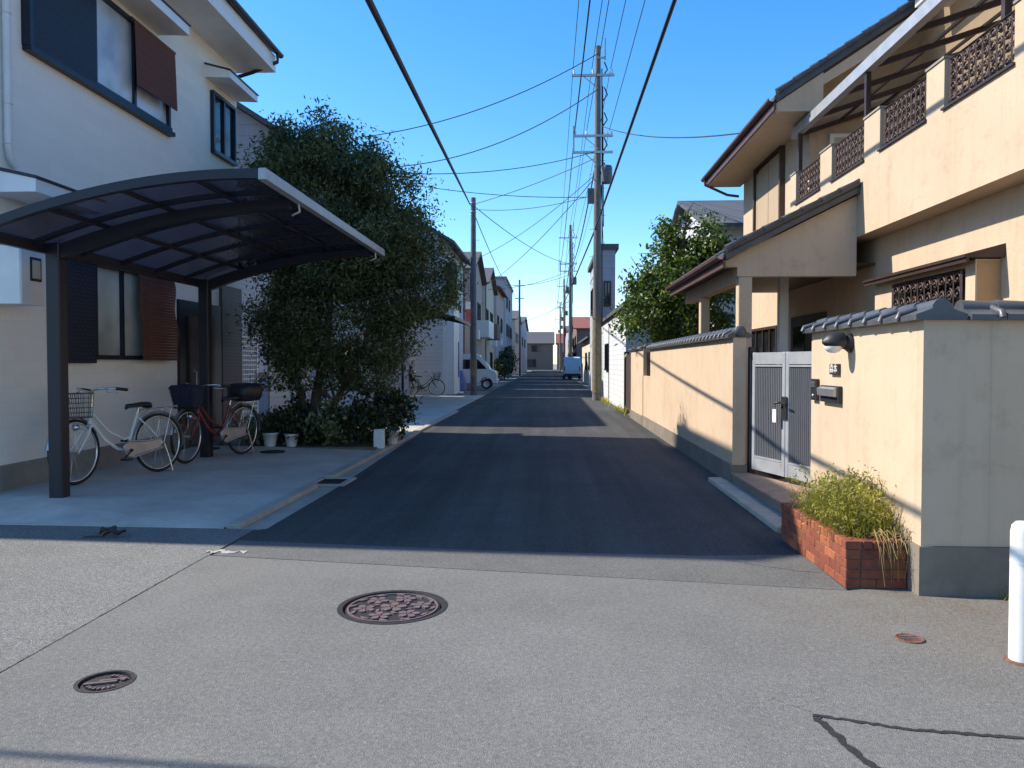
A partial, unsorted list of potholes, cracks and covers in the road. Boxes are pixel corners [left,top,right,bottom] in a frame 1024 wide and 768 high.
manhole cover [894,633,925,644]
drain grate [308,477,357,488]
manhole cover [73,670,136,693]
manhole cover [337,590,448,625]
